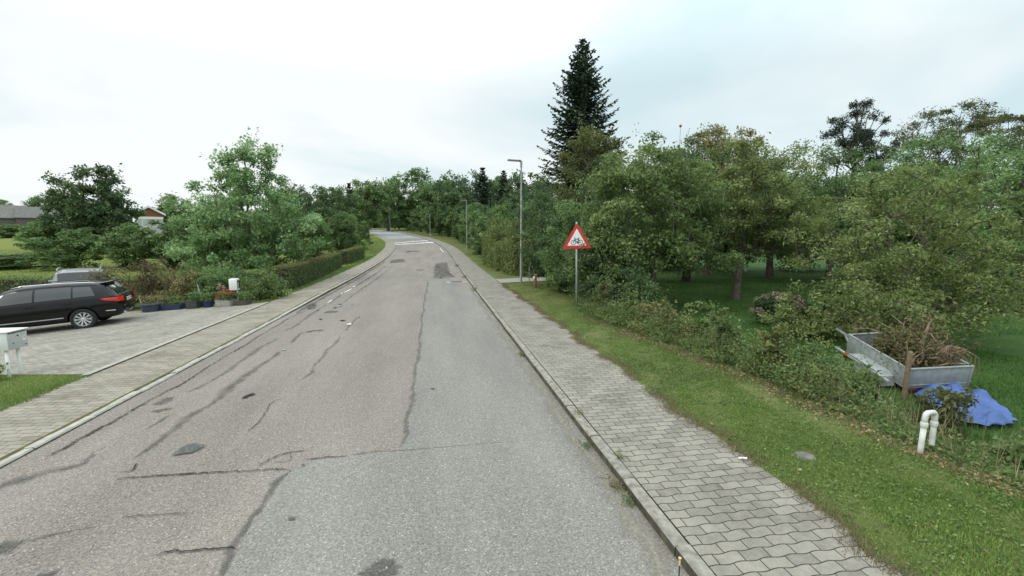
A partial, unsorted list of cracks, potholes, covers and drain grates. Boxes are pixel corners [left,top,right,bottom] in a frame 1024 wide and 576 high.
crack [48,312,309,479]
crack [155,546,235,555]
